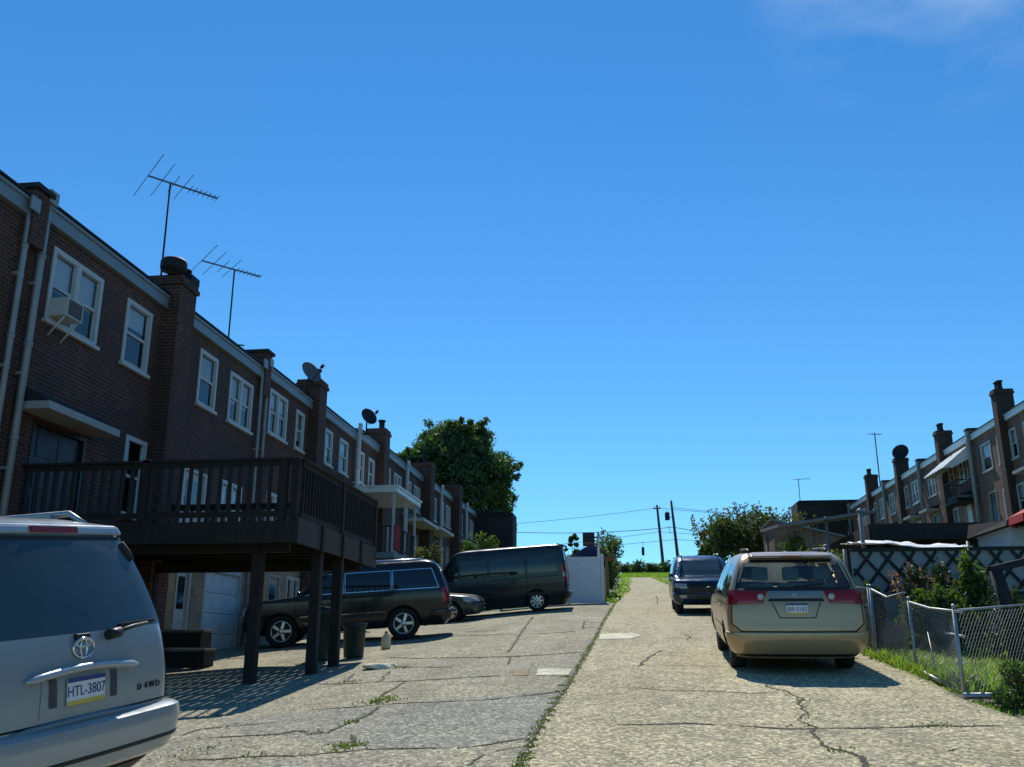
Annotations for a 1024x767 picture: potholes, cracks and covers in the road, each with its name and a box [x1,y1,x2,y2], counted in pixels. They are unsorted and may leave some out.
crack [149,594,1011,767]
